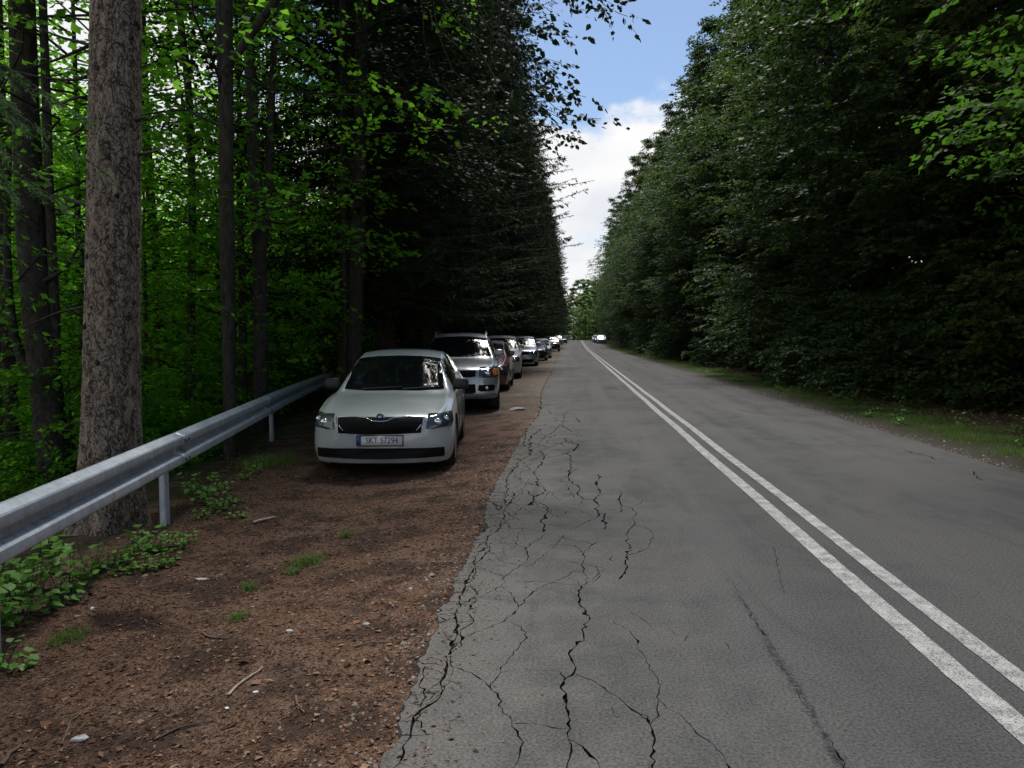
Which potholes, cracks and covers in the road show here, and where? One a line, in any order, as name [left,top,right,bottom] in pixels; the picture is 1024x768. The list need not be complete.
crack [382,415,731,768]
